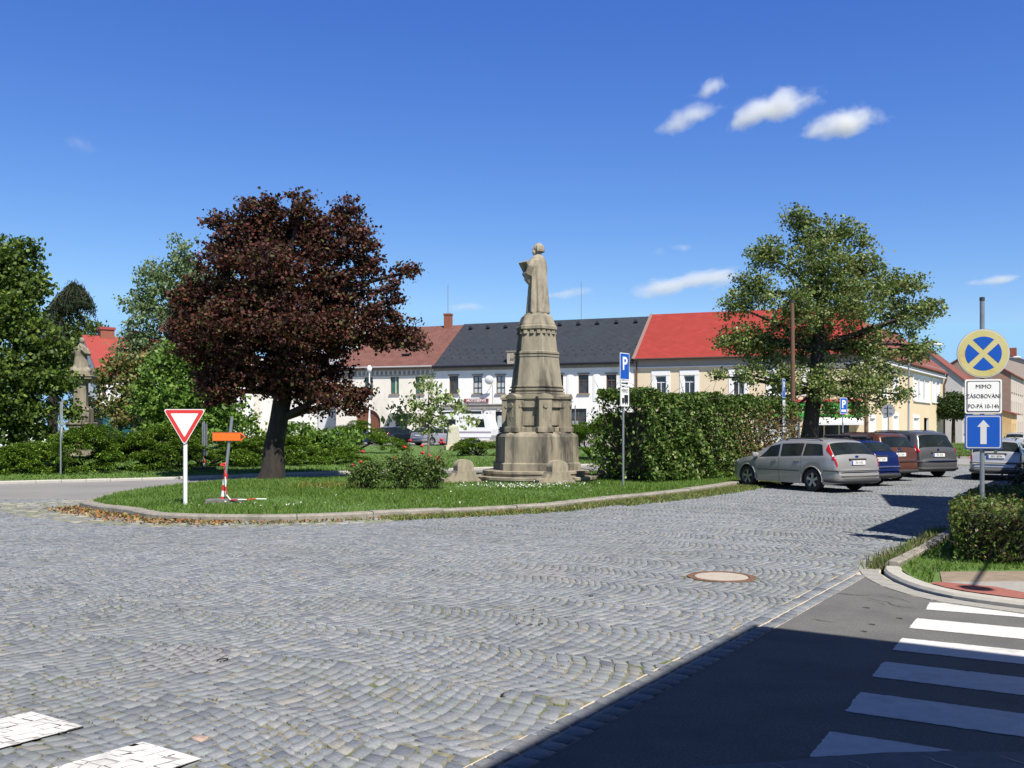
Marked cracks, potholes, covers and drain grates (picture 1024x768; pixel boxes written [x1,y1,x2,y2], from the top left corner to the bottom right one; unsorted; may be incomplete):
manhole cover [687,571,756,583]
